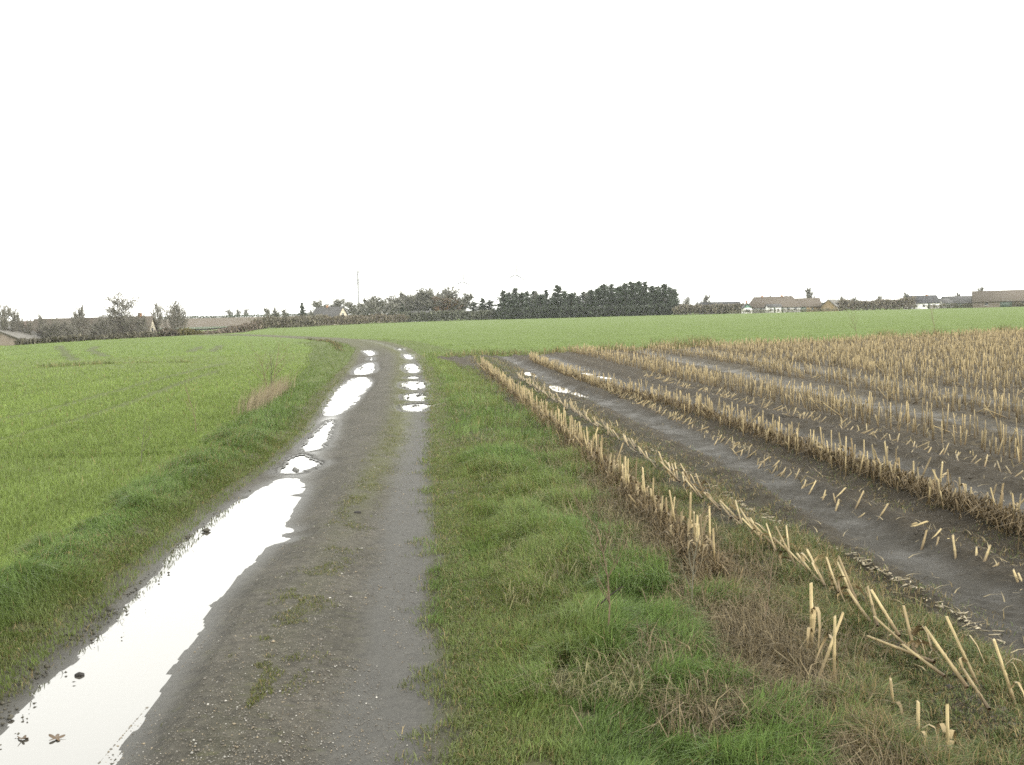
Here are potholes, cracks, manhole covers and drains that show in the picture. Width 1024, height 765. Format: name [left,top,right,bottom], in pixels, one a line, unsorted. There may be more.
pothole [395,403,433,412]
pothole [269,453,331,475]
pothole [397,380,428,390]
